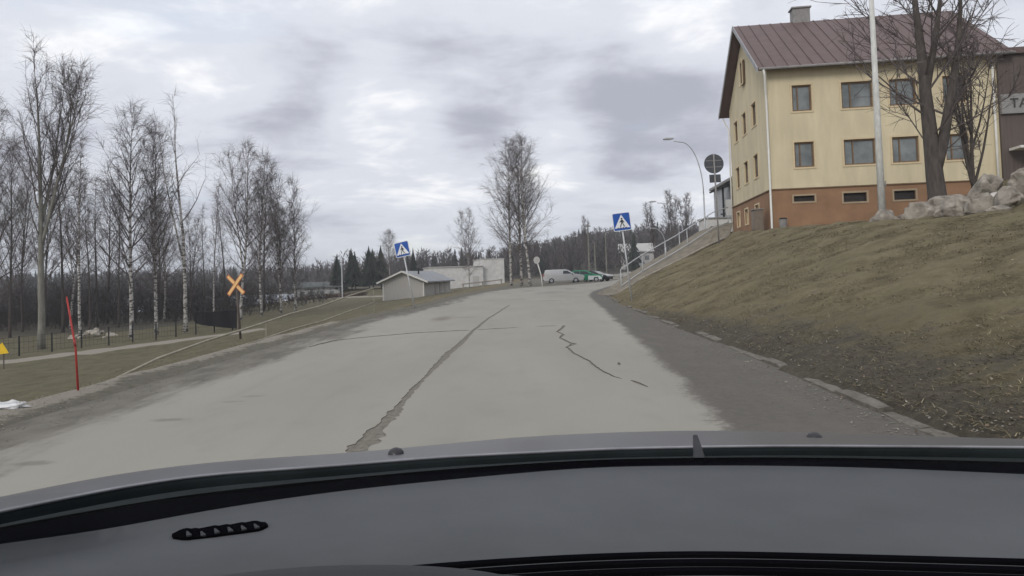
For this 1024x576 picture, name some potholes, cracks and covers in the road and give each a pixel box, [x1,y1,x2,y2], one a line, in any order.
crack [310,327,517,347]
crack [556,326,648,387]
